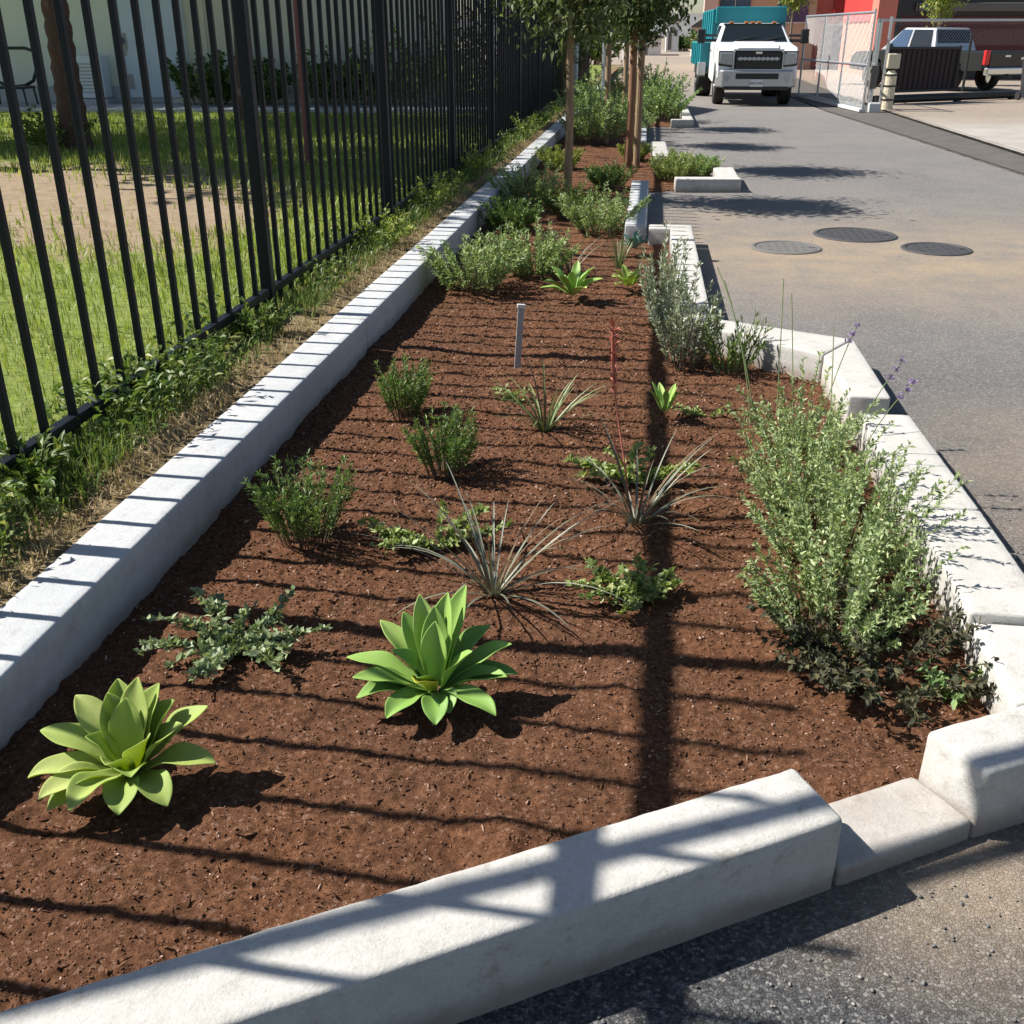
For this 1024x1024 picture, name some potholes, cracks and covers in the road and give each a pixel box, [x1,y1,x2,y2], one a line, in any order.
manhole cover [813,227,898,242]
manhole cover [900,242,973,256]
manhole cover [750,240,822,254]
